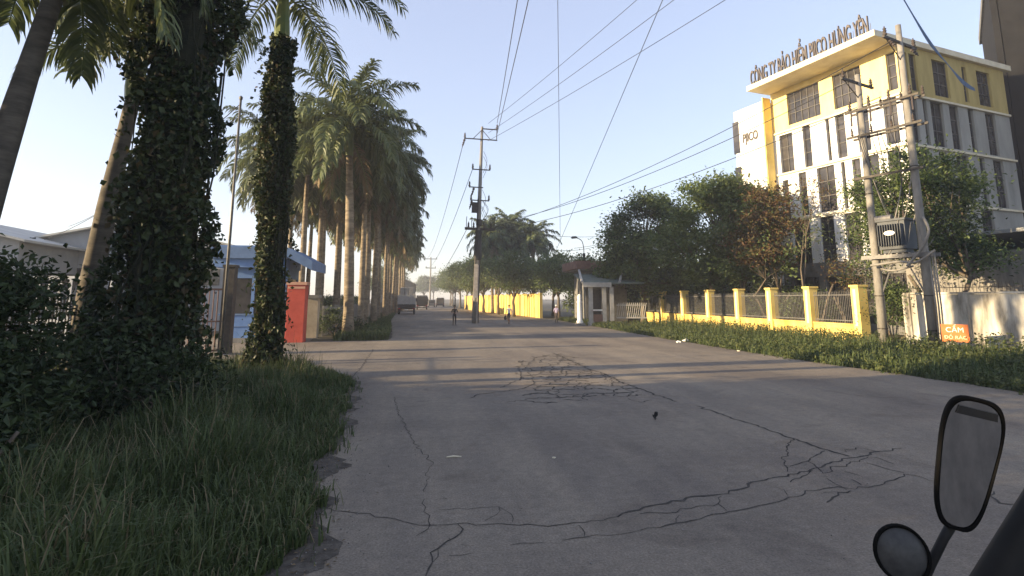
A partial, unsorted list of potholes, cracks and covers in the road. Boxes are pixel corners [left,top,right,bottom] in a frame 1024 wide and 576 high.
crack [471,354,676,404]
crack [320,406,931,576]
